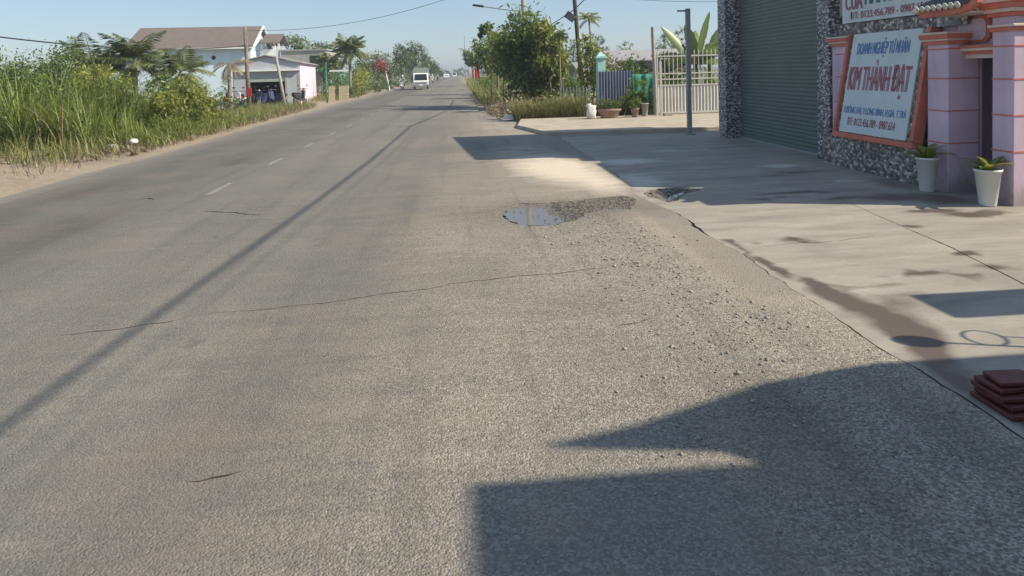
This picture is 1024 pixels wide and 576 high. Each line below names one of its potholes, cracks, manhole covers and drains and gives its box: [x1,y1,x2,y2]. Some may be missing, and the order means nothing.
pothole [493,196,636,227]
pothole [644,187,701,202]
crack [191,471,241,482]
crack [56,319,179,336]
crack [198,262,645,315]
